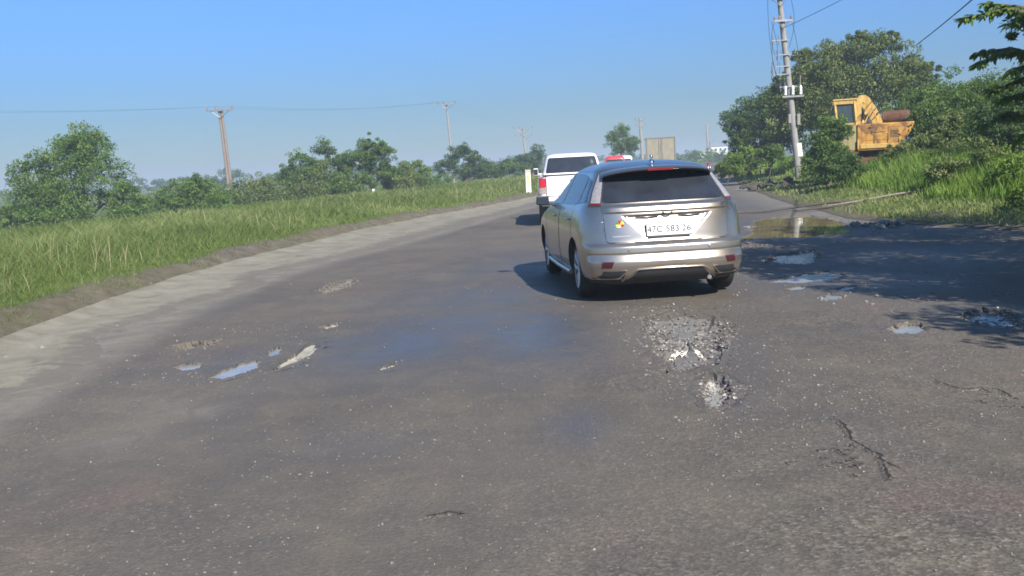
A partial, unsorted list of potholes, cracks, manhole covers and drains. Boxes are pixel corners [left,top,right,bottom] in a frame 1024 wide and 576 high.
crack [784,417,901,481]
pothole [938,305,1024,330]
pothole [363,359,411,373]
crack [929,379,1024,409]
pothole [194,358,281,383]
pothole [157,360,218,374]
pothole [804,292,862,302]
pothole [634,303,744,386]
pothole [156,337,239,353]
pothole [304,320,353,332]
pothole [752,248,838,266]
